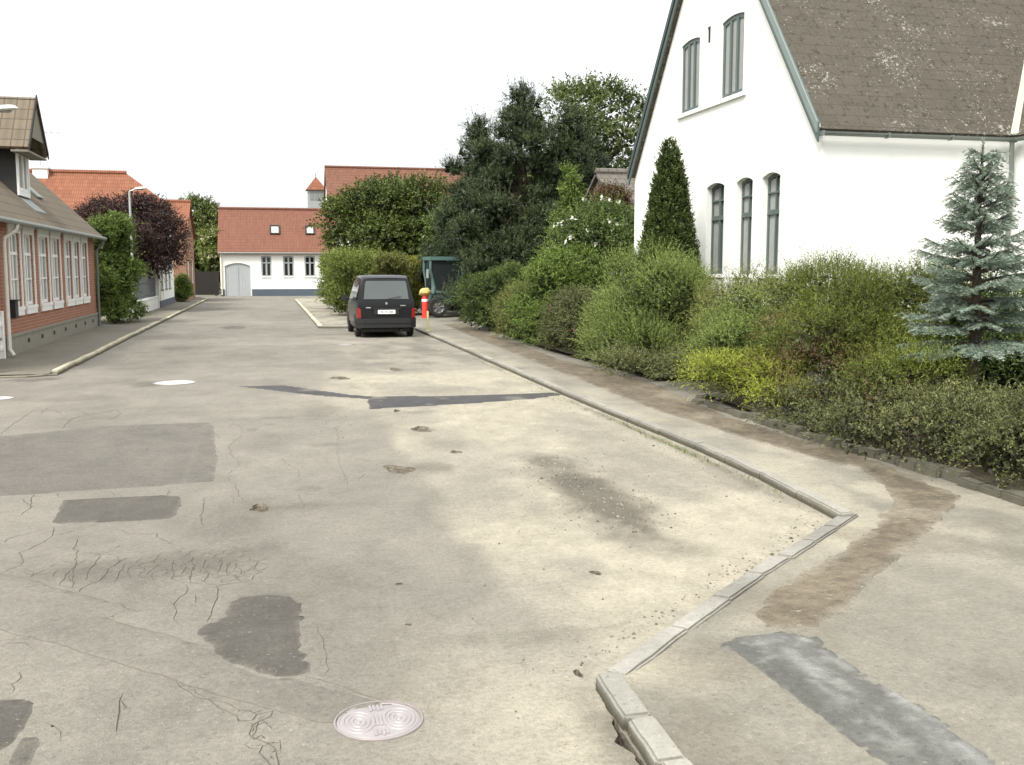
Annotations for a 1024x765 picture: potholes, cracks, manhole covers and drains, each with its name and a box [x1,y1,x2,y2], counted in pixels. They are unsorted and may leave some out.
crack [2,528,269,646]
crack [215,399,311,503]
crack [301,625,383,700]
manhole cover [333,700,424,742]
crack [0,629,333,765]
pothole [382,465,416,474]
pothole [249,504,271,512]
